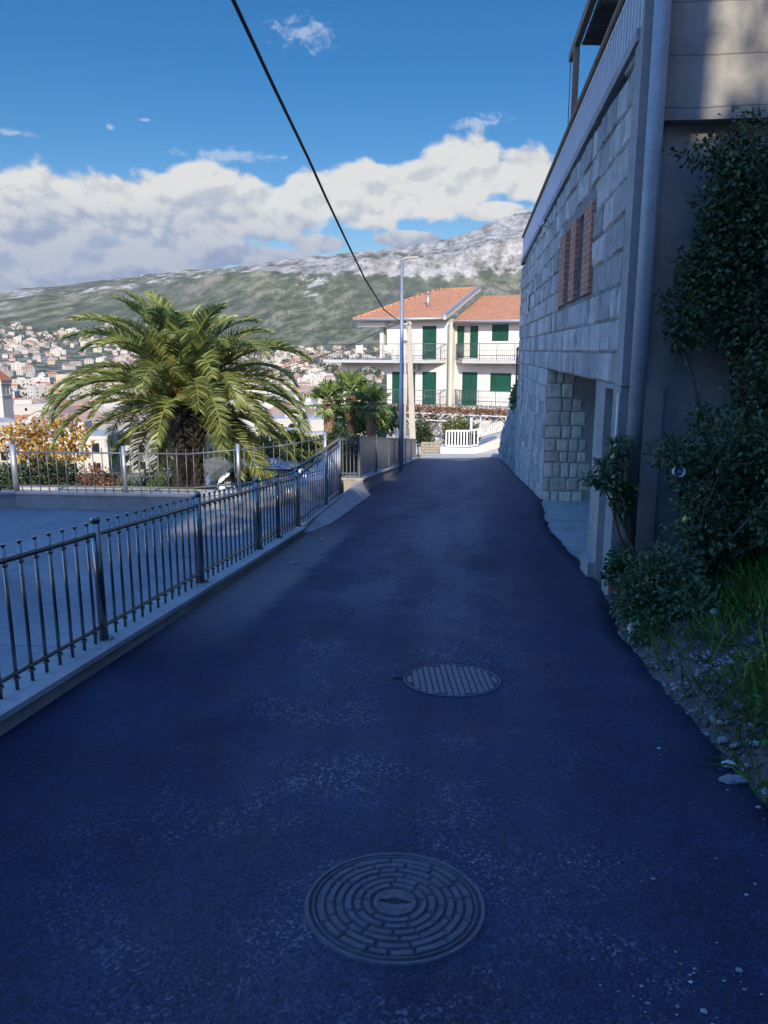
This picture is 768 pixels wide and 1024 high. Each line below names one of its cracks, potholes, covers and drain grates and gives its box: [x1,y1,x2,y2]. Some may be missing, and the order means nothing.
manhole cover [304,852,486,967]
manhole cover [392,664,501,697]
